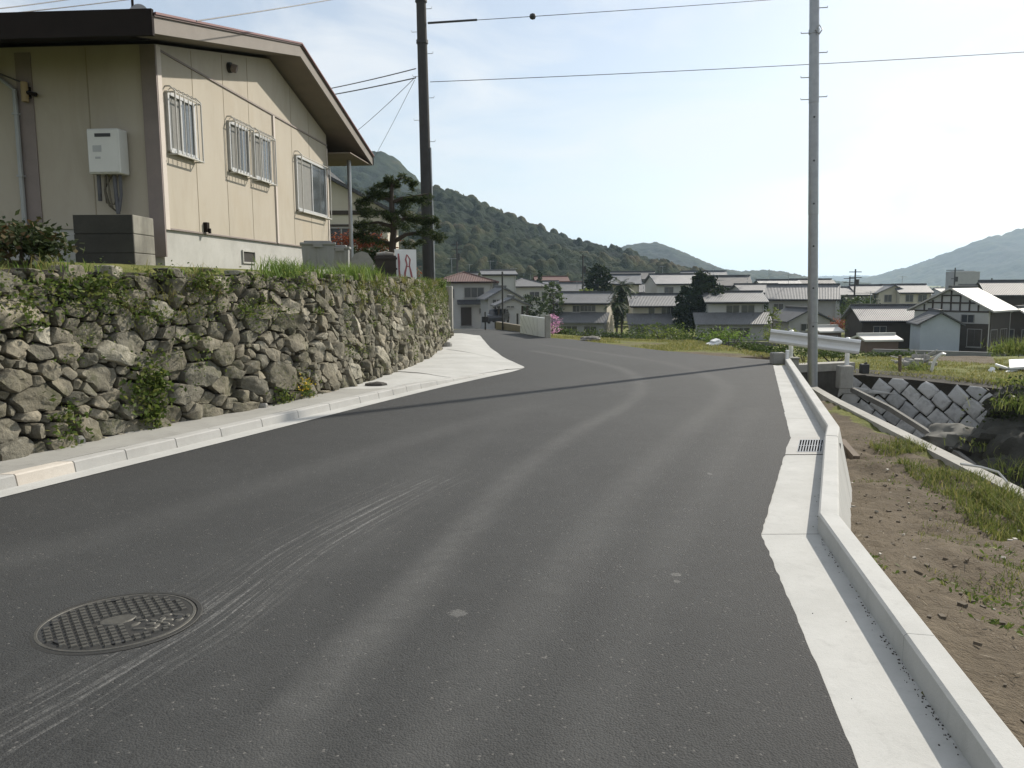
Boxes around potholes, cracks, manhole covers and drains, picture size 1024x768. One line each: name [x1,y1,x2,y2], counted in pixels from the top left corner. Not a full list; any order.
drain grate [785,437,825,455]
manhole cover [30,592,203,656]
